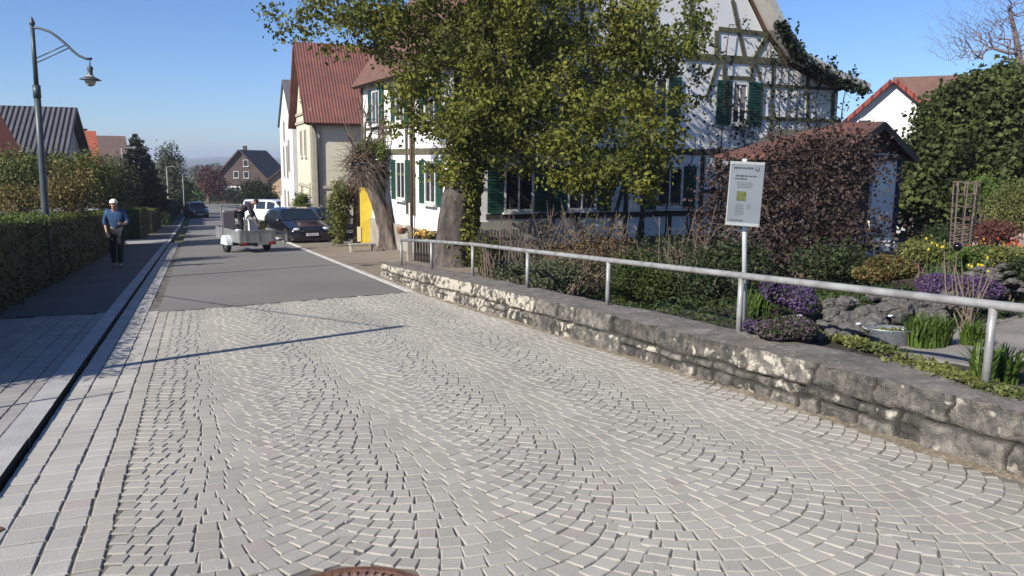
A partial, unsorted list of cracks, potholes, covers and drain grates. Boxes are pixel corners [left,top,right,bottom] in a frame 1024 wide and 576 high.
manhole cover [309,566,417,576]
